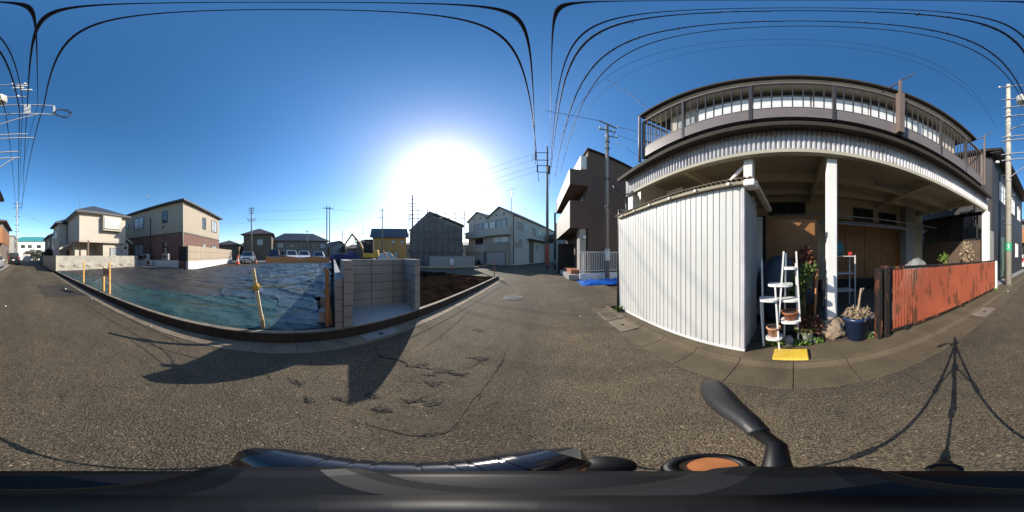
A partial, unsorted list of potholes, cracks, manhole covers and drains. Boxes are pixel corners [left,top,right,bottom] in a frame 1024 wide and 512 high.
crack [366,326,505,377]
crack [331,393,445,423]
